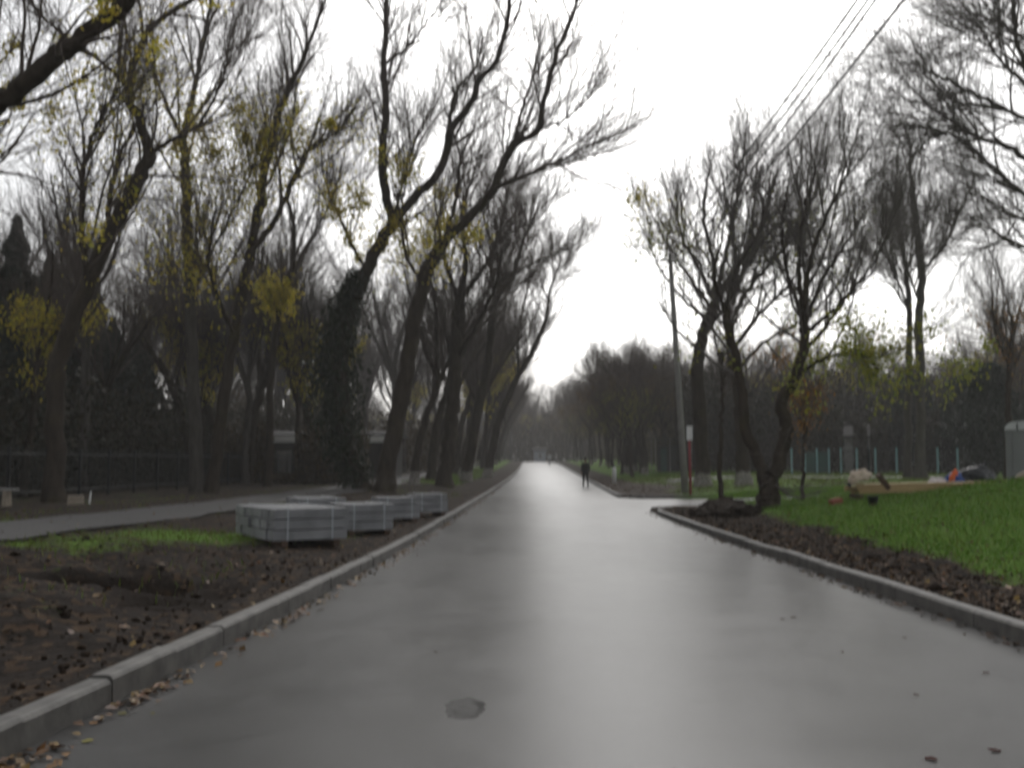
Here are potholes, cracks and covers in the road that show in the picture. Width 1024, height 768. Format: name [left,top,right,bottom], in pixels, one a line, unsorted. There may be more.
pothole [444,698,487,719]
